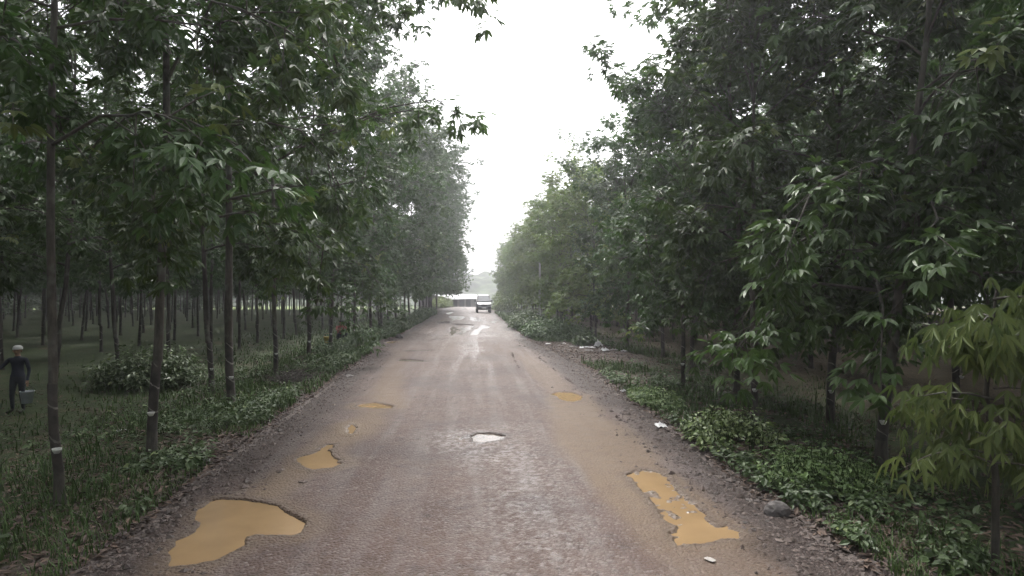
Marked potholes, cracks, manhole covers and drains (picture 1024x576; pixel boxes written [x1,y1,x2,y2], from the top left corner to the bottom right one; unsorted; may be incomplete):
pothole [335,421,369,437]
pothole [544,391,590,403]
pothole [350,401,402,410]
pothole [285,441,355,474]
pothole [144,493,324,576]
pothole [614,466,761,553]
pothole [461,430,516,445]
